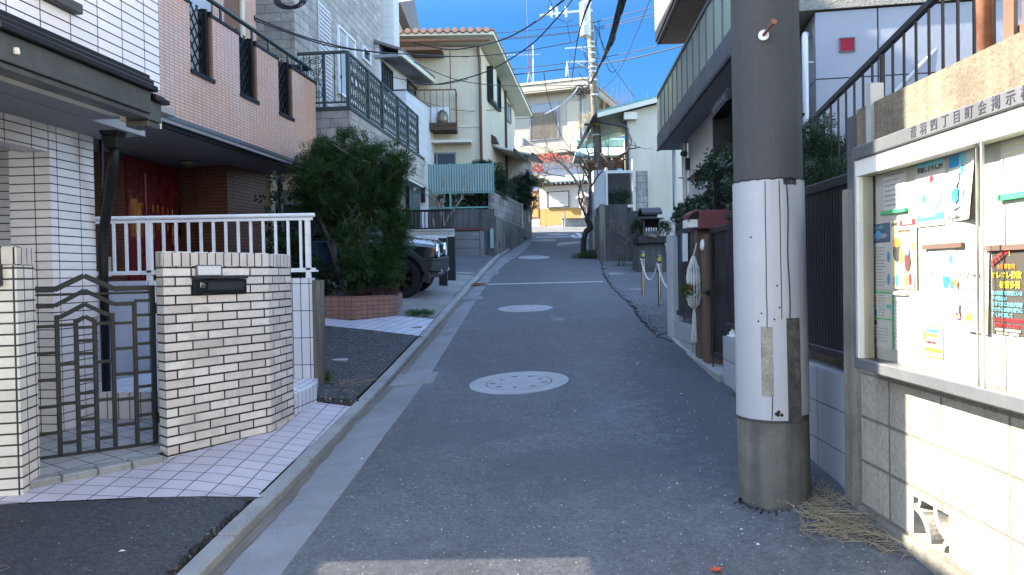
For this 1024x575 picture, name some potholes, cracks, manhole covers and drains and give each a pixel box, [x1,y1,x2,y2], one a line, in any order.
manhole cover [469,371,569,395]
crack [600,261,674,342]
